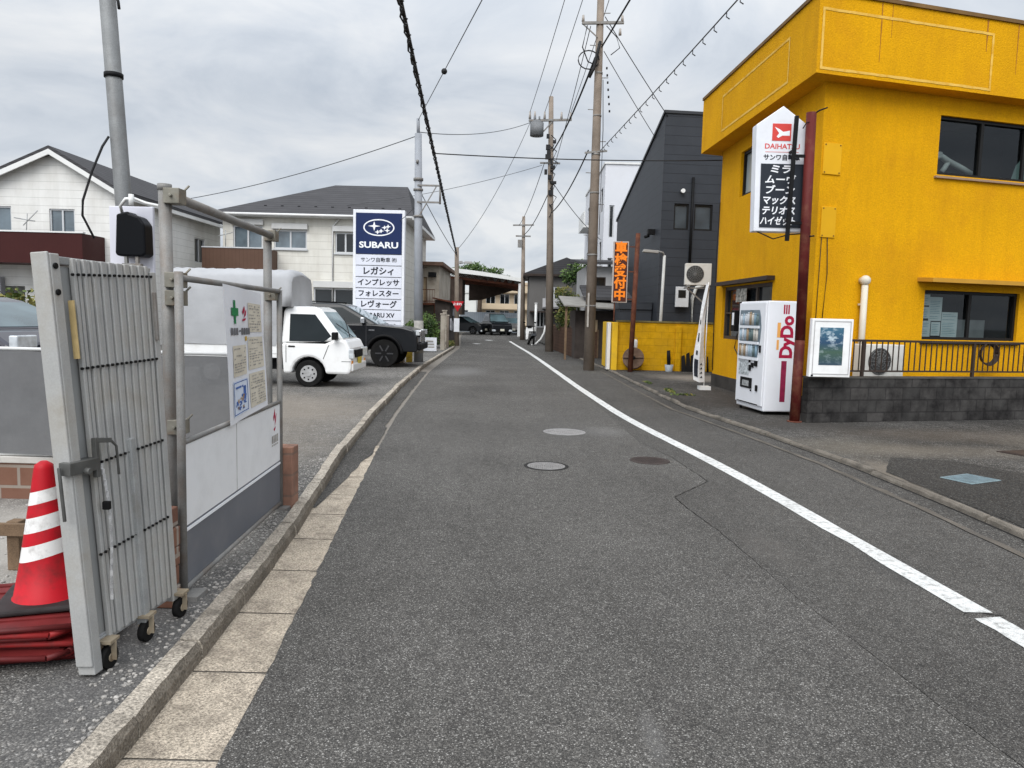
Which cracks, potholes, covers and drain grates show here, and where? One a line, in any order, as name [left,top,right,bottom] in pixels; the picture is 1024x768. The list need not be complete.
manhole cover [630,457,670,465]
manhole cover [940,474,1001,484]
manhole cover [524,461,569,471]
